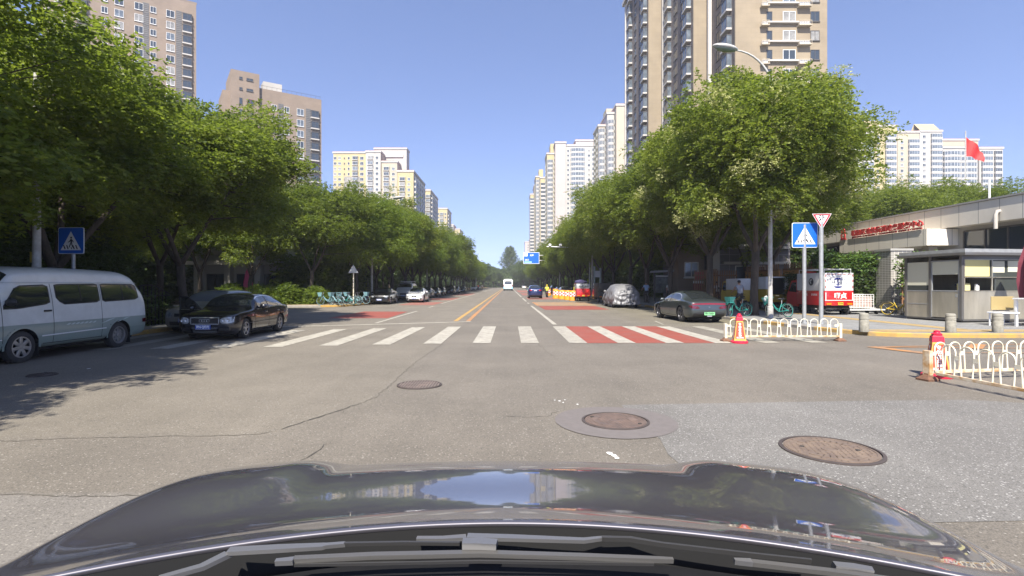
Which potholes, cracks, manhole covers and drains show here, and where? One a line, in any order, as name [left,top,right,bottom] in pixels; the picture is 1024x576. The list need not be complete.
crack [1,347,437,441]
manhole cover [397,380,442,390]
manhole cover [555,407,679,439]
manhole cover [778,436,887,466]
